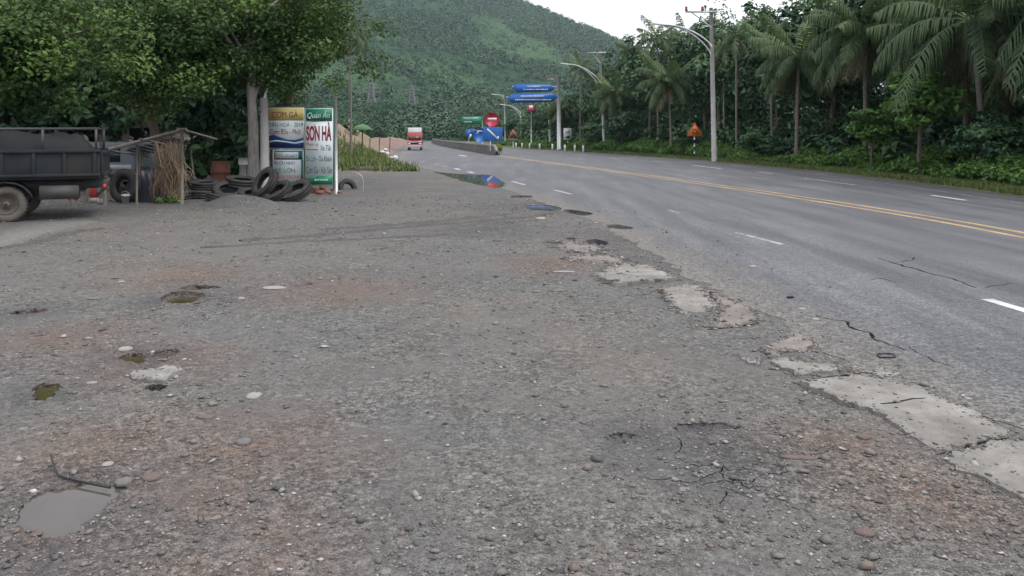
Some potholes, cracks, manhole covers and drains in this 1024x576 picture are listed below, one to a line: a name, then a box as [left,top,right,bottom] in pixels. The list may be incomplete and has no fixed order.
pothole [30,382,62,401]
crack [871,258,1009,288]
pothole [14,481,128,538]
crack [816,315,954,368]
pothole [435,172,506,188]
pothole [153,349,181,358]
pothole [118,352,148,364]
crack [608,439,789,505]
pothole [160,290,206,303]
